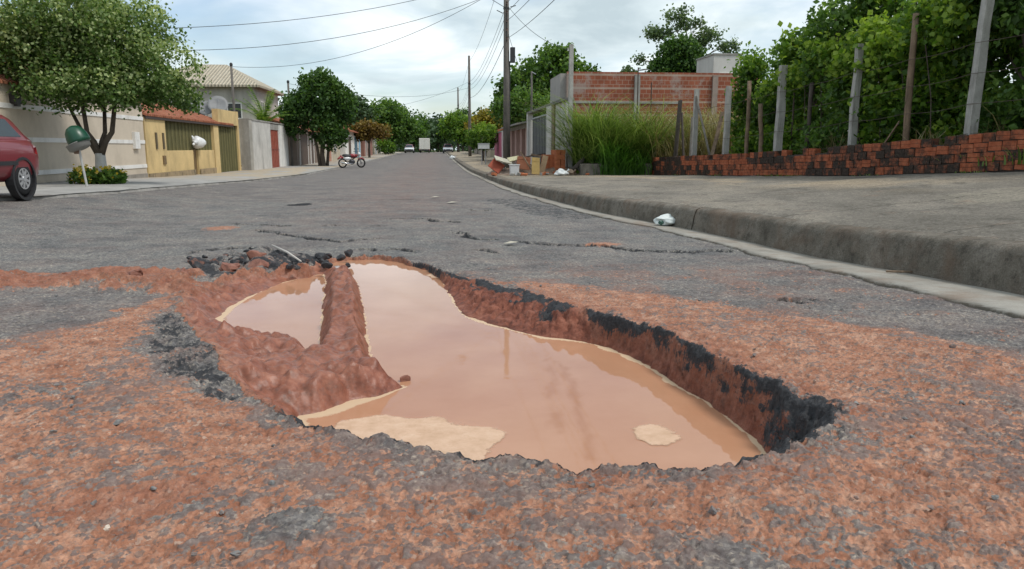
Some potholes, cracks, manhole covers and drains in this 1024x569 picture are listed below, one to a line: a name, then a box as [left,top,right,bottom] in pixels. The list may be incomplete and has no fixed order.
crack [188,209,735,255]
pothole [174,254,837,475]
